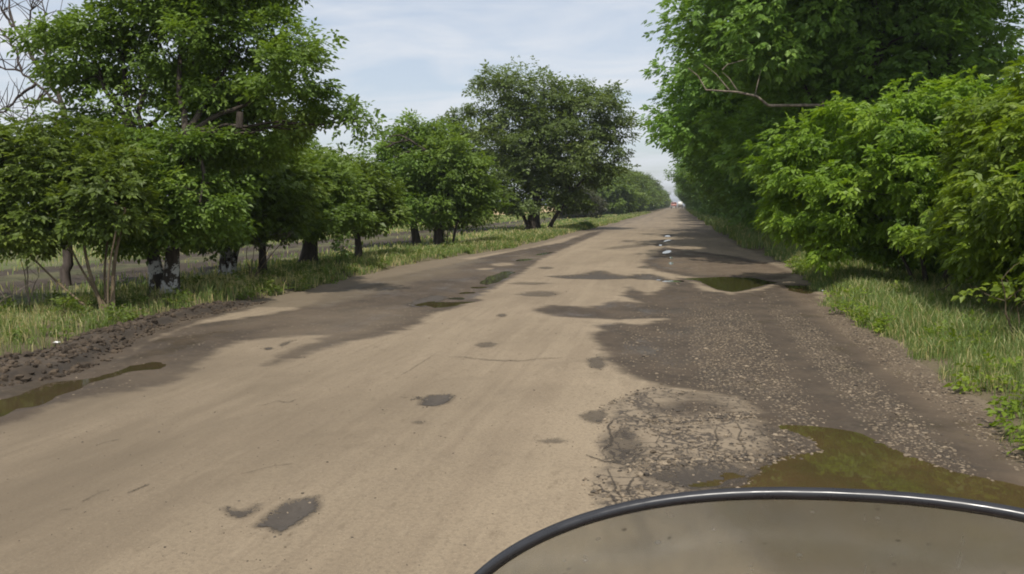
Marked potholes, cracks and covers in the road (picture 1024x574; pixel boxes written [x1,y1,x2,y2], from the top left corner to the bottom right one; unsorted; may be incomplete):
pothole [257,497,319,532]
crack [650,415,778,461]
pothole [225,506,255,518]
crack [587,422,634,504]
pothole [409,295,446,307]
pothole [421,394,453,406]
